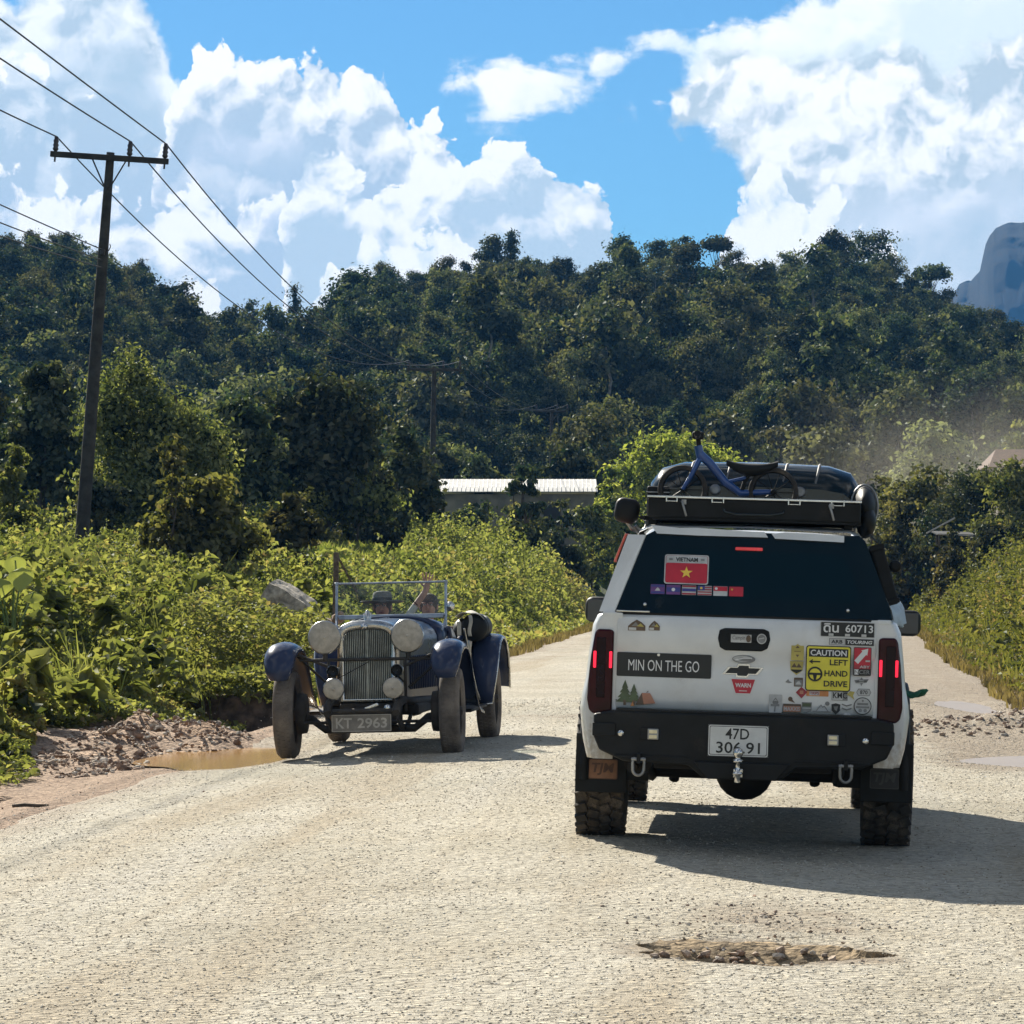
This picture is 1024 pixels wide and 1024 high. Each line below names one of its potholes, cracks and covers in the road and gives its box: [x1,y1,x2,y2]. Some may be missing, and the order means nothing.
pothole [597,894,903,966]
